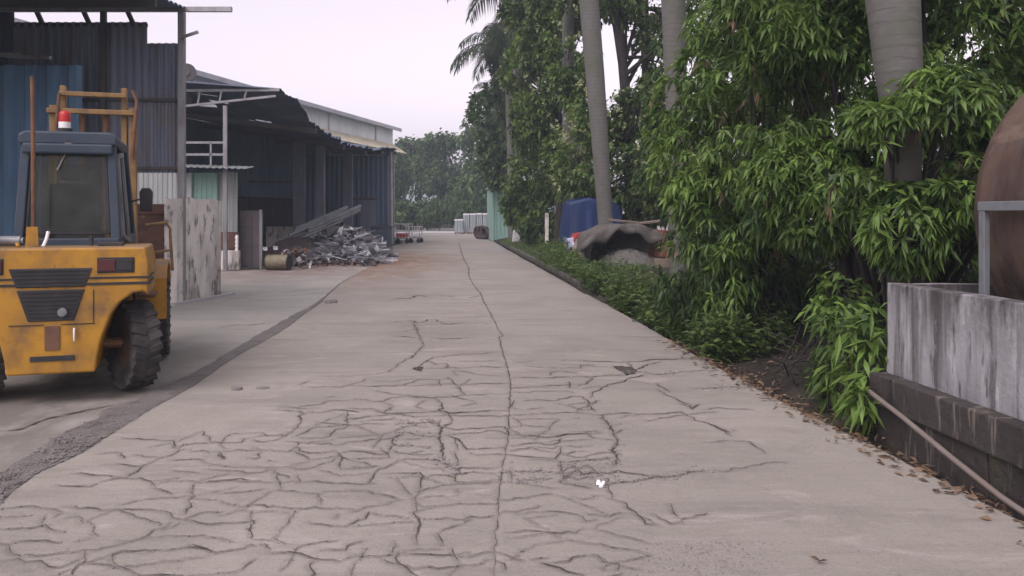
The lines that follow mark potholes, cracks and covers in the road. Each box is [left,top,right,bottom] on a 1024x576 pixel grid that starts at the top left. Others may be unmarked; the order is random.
crack [400,316,486,339]
pothole [614,366,637,375]
crack [496,358,777,576]
crack [0,323,509,576]
